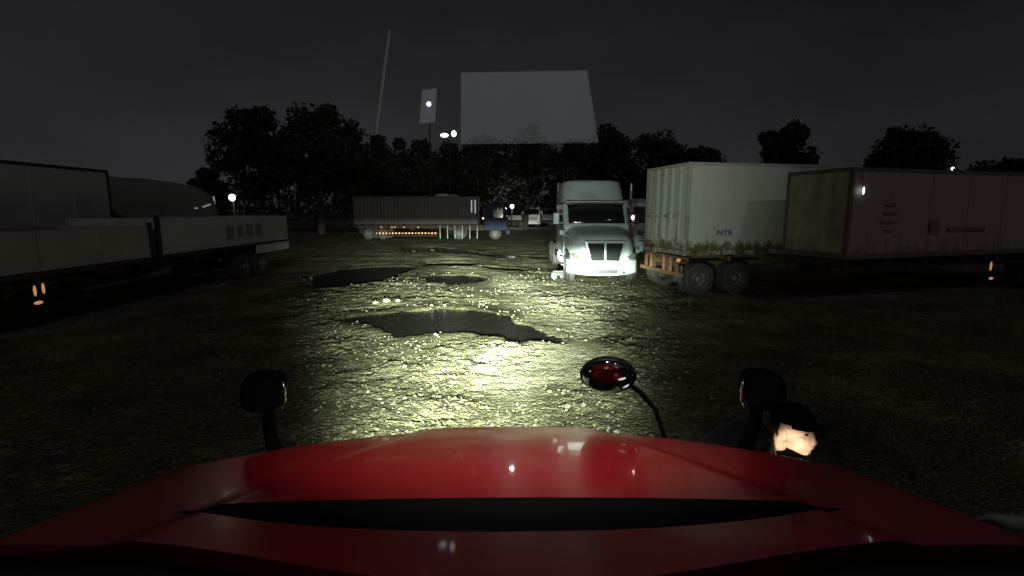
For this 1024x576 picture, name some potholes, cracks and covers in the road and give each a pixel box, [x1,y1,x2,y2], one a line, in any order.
pothole [401,246,549,258]
pothole [334,306,570,344]
pothole [305,265,416,289]
pothole [415,274,489,284]
